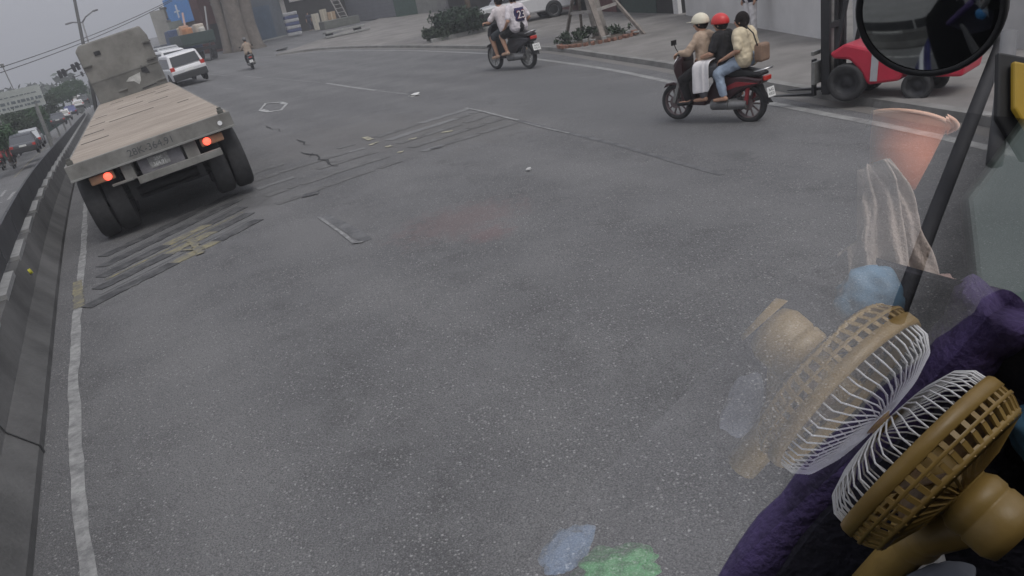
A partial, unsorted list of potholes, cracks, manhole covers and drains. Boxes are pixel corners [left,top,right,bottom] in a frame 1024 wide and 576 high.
crack [264,125,339,166]
